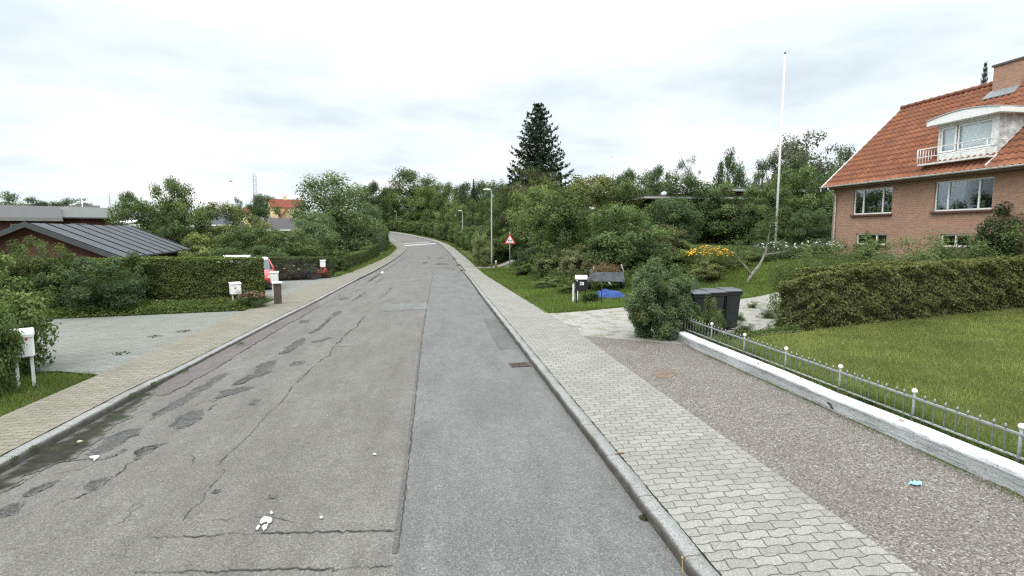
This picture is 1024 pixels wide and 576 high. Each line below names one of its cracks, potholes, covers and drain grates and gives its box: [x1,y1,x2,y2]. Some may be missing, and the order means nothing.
crack [4,443,159,503]
crack [151,256,407,538]
crack [129,565,393,573]
